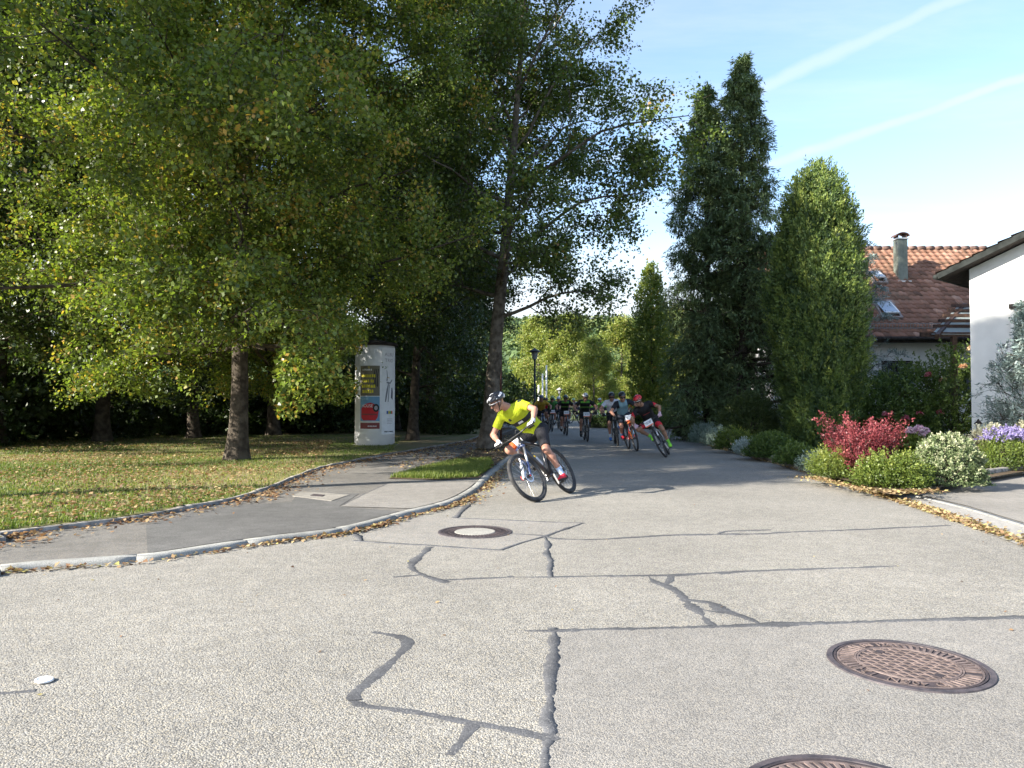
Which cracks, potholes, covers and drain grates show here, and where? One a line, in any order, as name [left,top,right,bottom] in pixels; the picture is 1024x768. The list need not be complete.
utility cover [293,491,348,501]
manhole cover [438,525,512,539]
manhole cover [826,639,998,694]
crack [351,532,363,540]
manhole cover [749,754,892,768]
